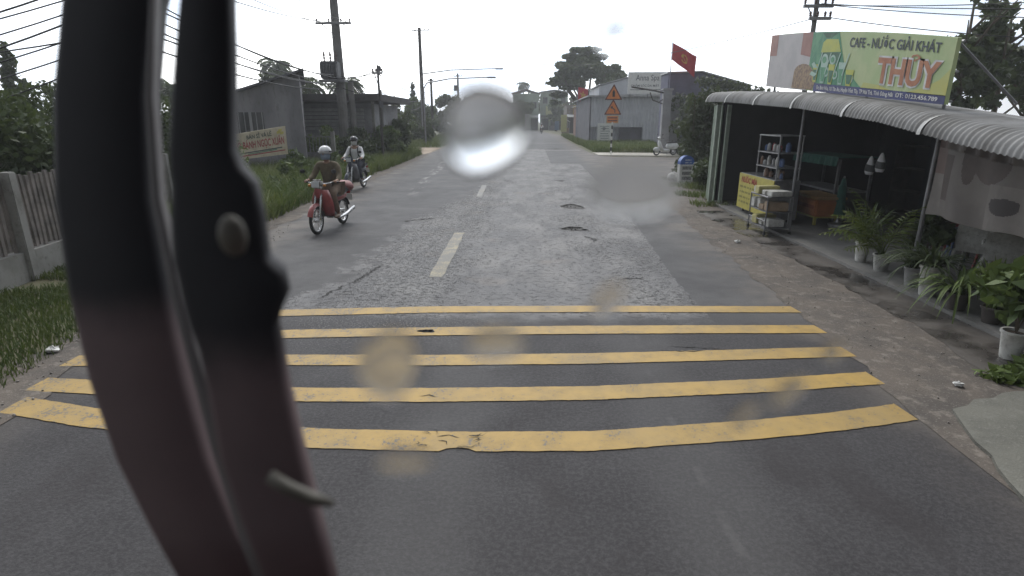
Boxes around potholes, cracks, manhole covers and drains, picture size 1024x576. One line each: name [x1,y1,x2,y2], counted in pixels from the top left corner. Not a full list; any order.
crack [417,429,486,448]
crack [317,264,382,299]
